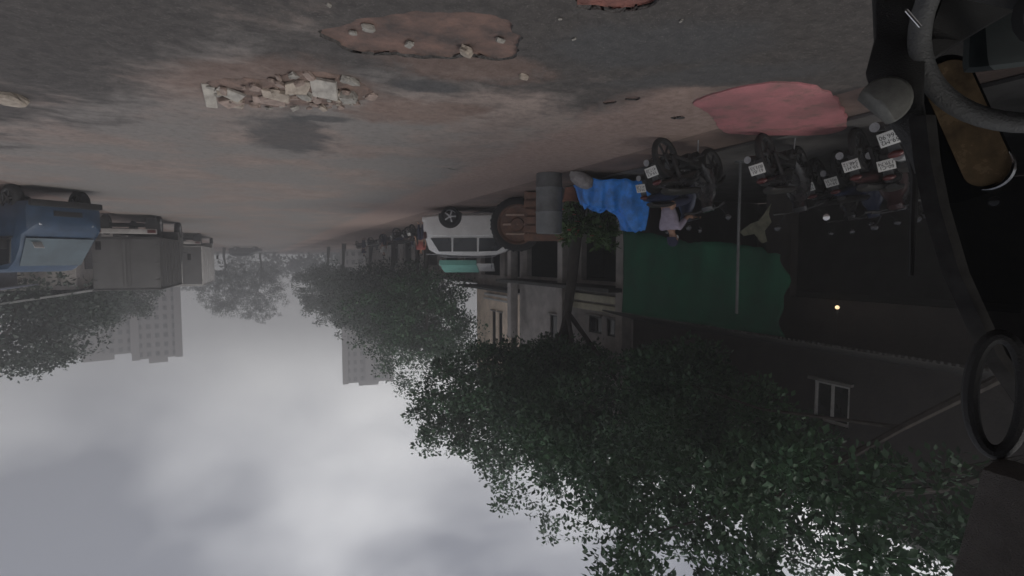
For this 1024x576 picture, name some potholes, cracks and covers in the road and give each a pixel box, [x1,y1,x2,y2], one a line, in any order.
pothole [318,11,523,61]
